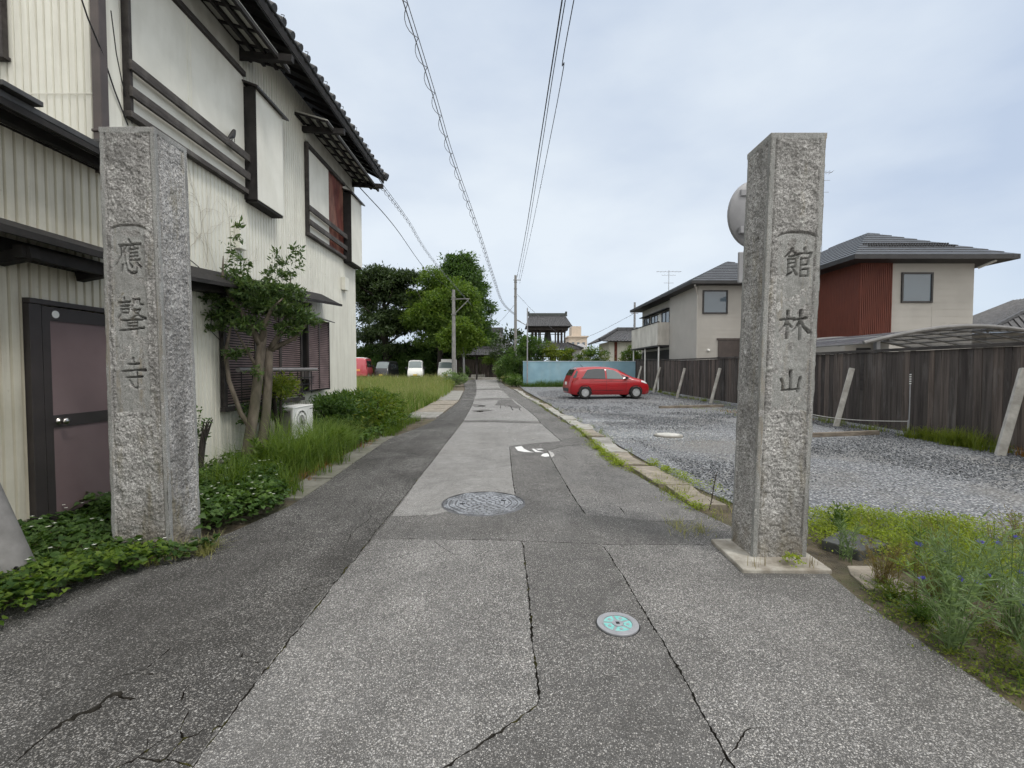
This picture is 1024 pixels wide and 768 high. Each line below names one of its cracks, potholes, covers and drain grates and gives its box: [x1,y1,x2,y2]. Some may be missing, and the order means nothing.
crack [8,648,203,768]
crack [602,546,756,768]
utility cover [596,612,640,637]
crack [443,542,541,768]
manhole cover [441,492,525,516]
